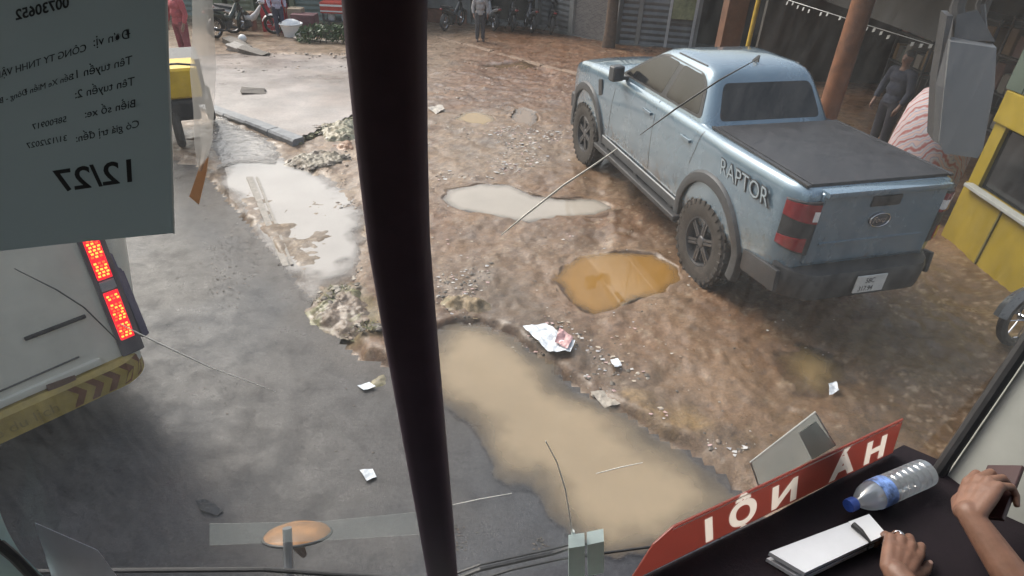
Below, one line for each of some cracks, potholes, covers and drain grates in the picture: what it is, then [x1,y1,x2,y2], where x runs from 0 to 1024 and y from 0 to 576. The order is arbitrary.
pothole [545,247,691,320]
pothole [432,180,624,228]
pothole [506,108,543,127]
pothole [450,111,501,125]
